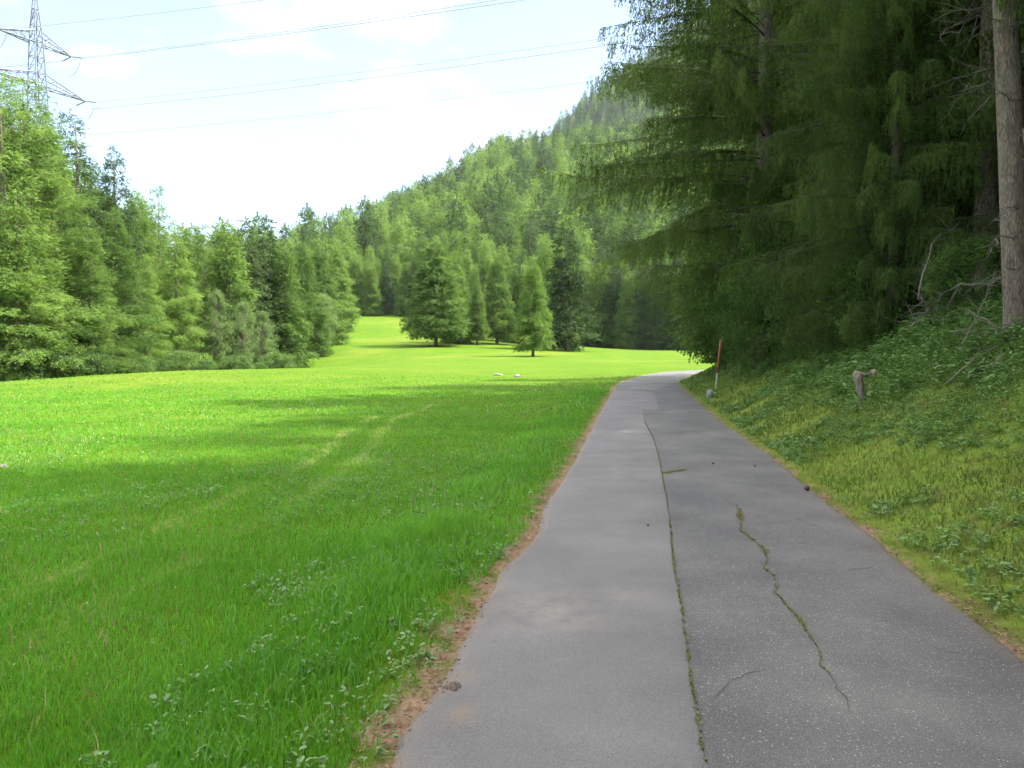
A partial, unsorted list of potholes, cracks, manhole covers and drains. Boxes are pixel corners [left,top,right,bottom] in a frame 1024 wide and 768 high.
crack [711,671,756,711]
crack [727,500,872,713]
